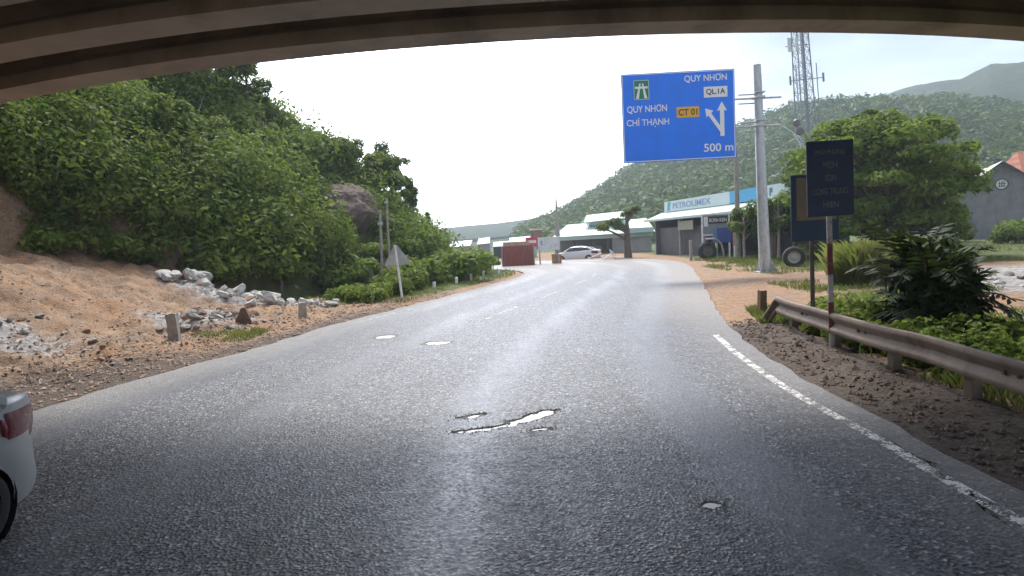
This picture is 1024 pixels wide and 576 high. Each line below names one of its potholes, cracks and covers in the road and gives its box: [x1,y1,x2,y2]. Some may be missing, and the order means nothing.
pothole [446,406,564,436]
